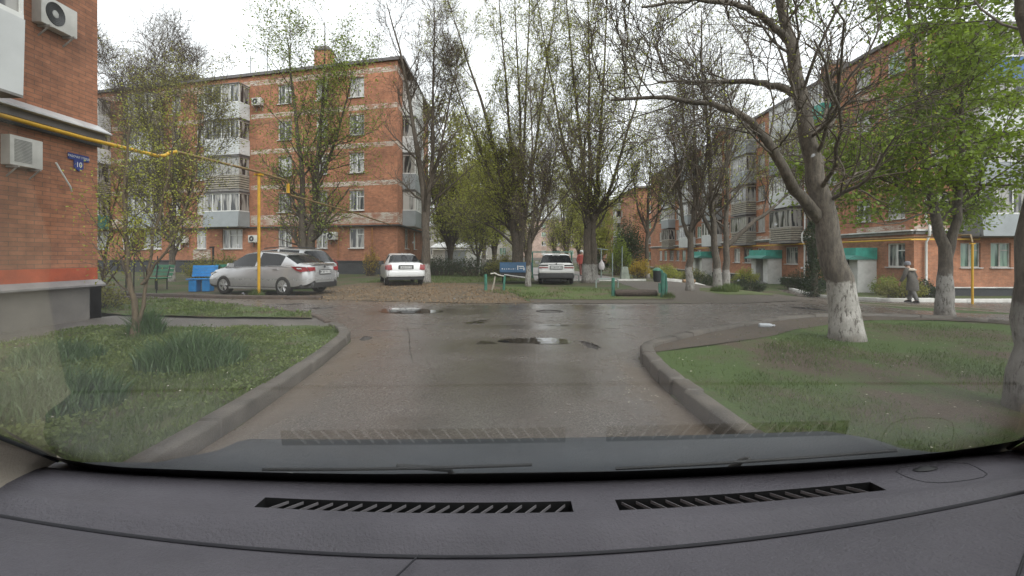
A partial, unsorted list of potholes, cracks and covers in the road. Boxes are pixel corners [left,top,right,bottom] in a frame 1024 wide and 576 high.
crack [372,308,640,359]
